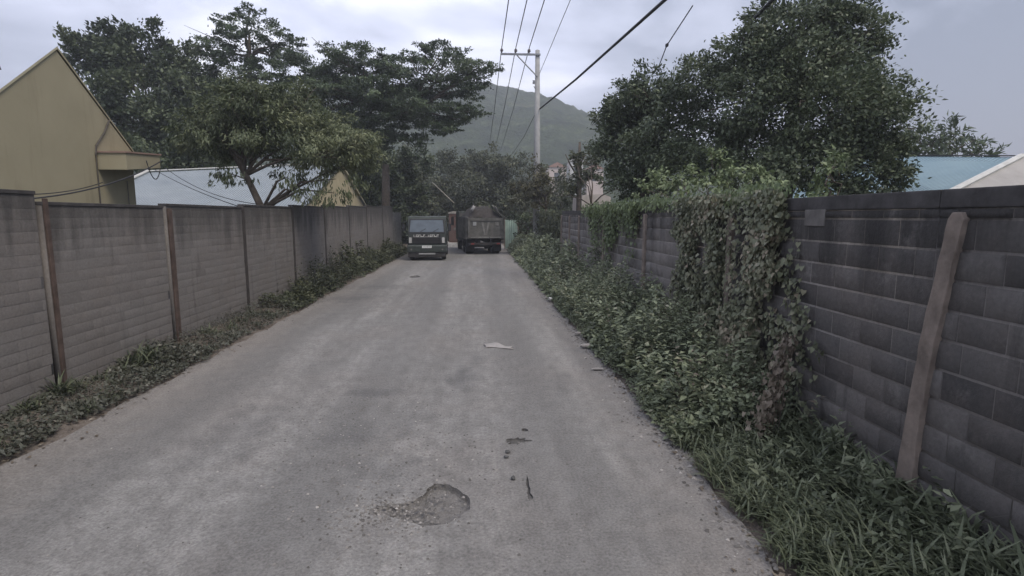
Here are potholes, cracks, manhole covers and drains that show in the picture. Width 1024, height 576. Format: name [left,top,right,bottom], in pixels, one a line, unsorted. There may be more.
pothole [368,484,470,526]
pothole [506,437,532,445]
